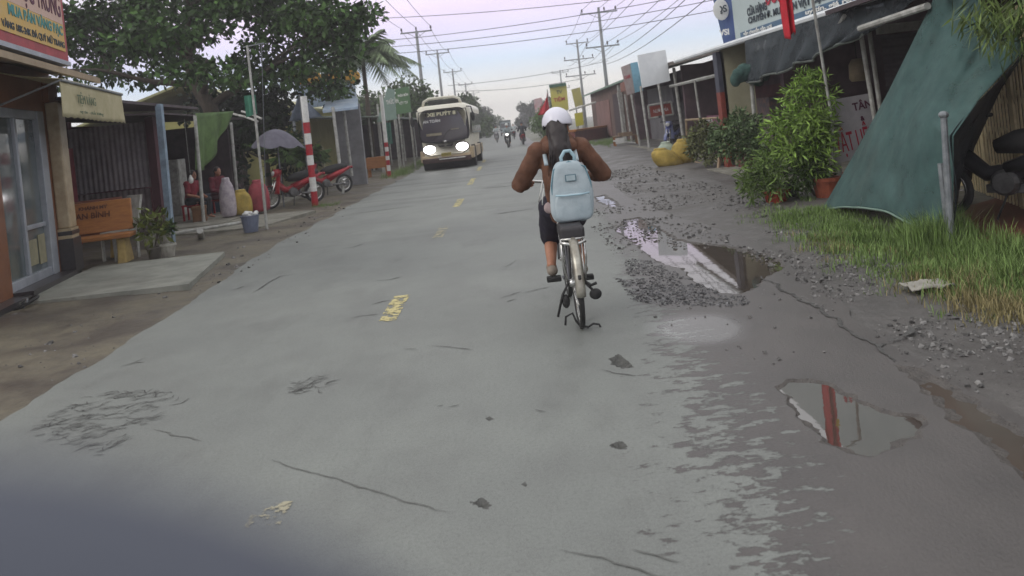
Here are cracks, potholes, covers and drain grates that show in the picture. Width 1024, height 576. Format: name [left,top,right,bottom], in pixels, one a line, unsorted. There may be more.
pothole [775,378,929,458]
pothole [470,497,492,509]
pothole [609,354,633,369]
crack [287,375,342,394]
pothole [615,217,786,294]
crack [761,276,923,361]
pothole [610,441,628,450]
crack [32,389,189,455]
